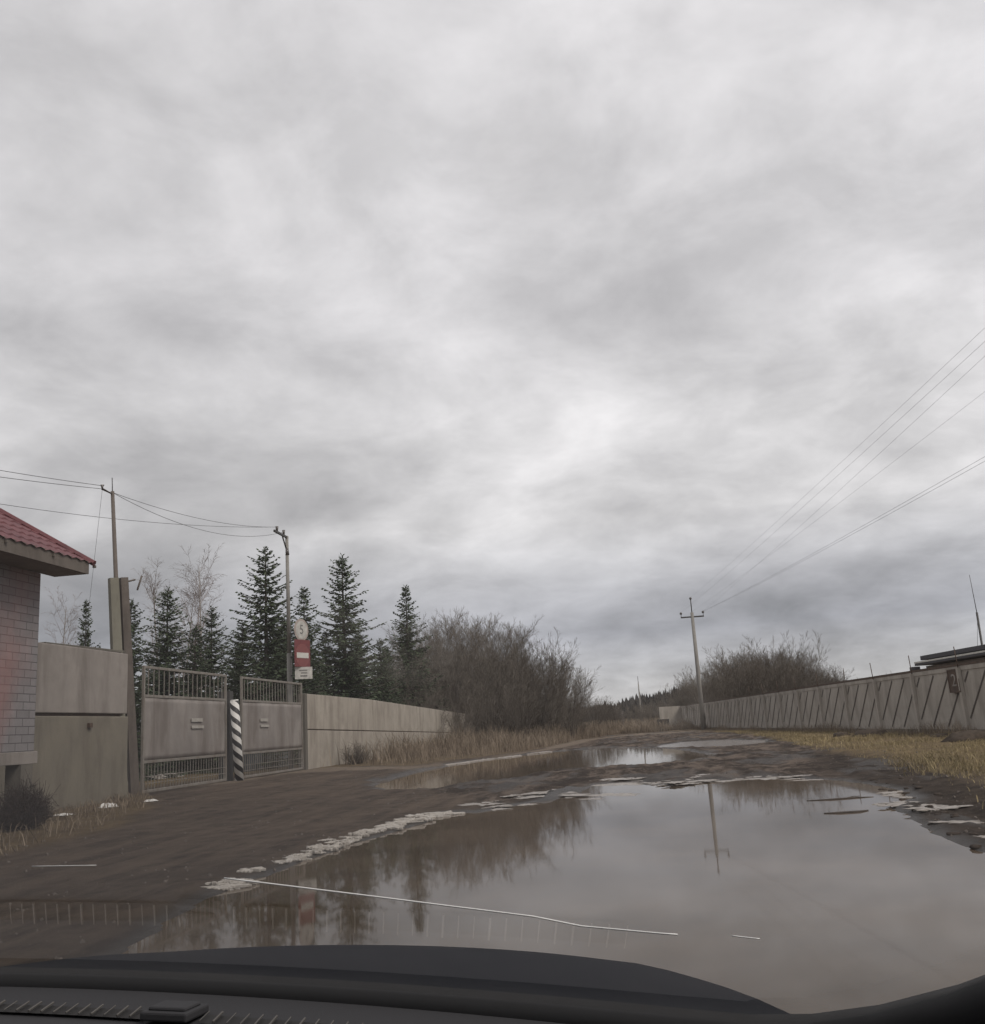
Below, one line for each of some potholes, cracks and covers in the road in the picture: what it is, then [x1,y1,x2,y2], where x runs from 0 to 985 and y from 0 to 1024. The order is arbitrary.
pothole [253,776,985,995]
pothole [364,747,715,790]
pothole [656,738,776,747]
